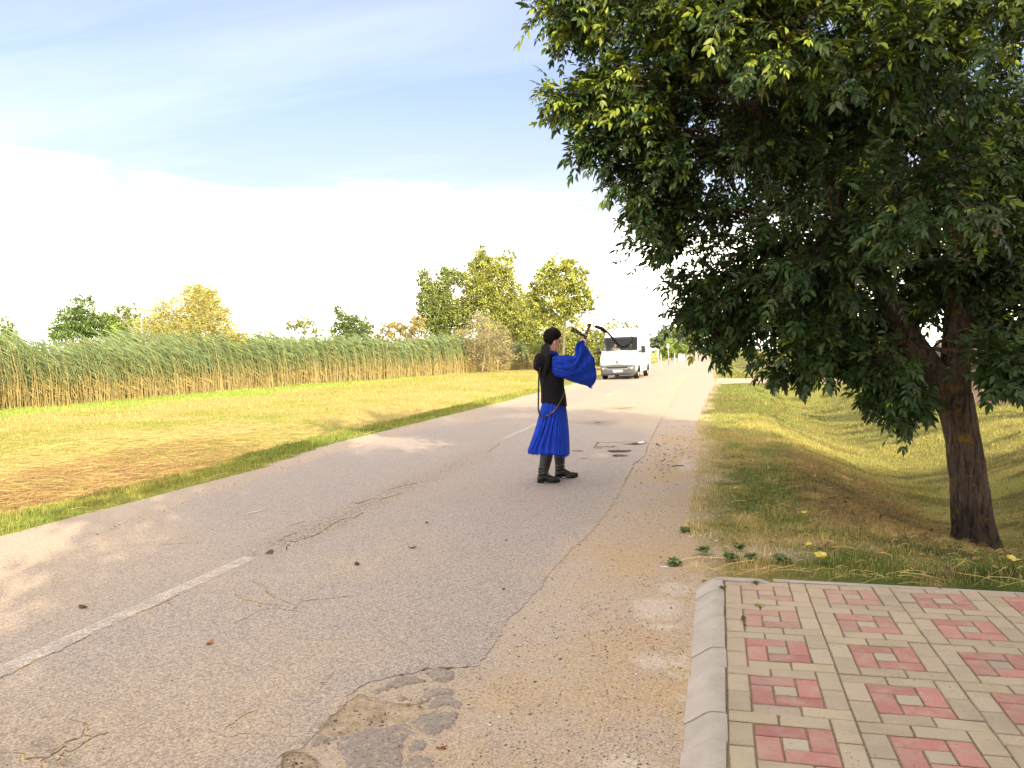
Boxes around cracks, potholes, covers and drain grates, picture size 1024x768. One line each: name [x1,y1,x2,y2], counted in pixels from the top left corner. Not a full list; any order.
crack [19,724,101,768]
pothole [319,695,424,737]
